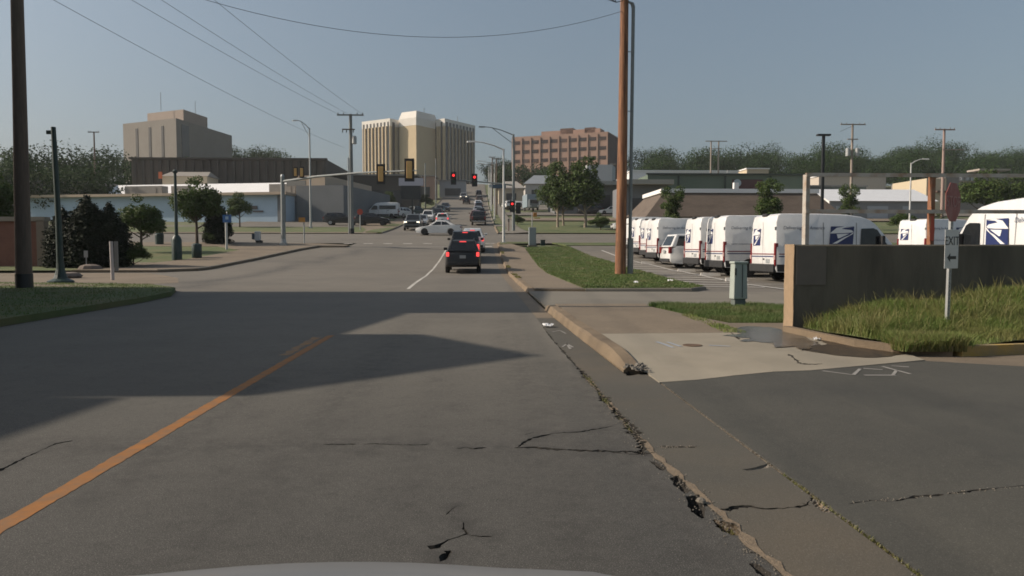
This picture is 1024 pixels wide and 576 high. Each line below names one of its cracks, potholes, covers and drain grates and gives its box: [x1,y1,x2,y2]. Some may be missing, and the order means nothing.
crack [428,507,492,561]
crack [515,327,695,455]
crack [720,497,817,511]
crack [0,440,73,471]
crack [850,485,1024,504]
